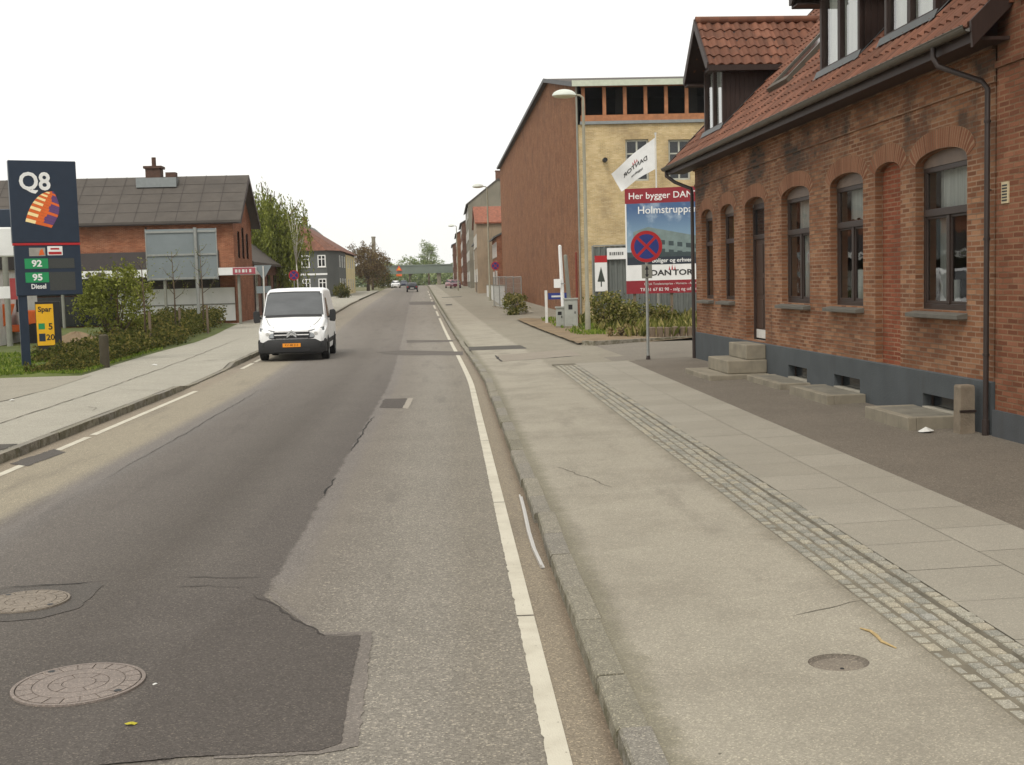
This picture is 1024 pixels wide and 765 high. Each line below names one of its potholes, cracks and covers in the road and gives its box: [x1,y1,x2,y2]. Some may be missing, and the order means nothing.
manhole cover [10,662,146,707]
manhole cover [0,590,70,614]
manhole cover [808,653,870,671]
